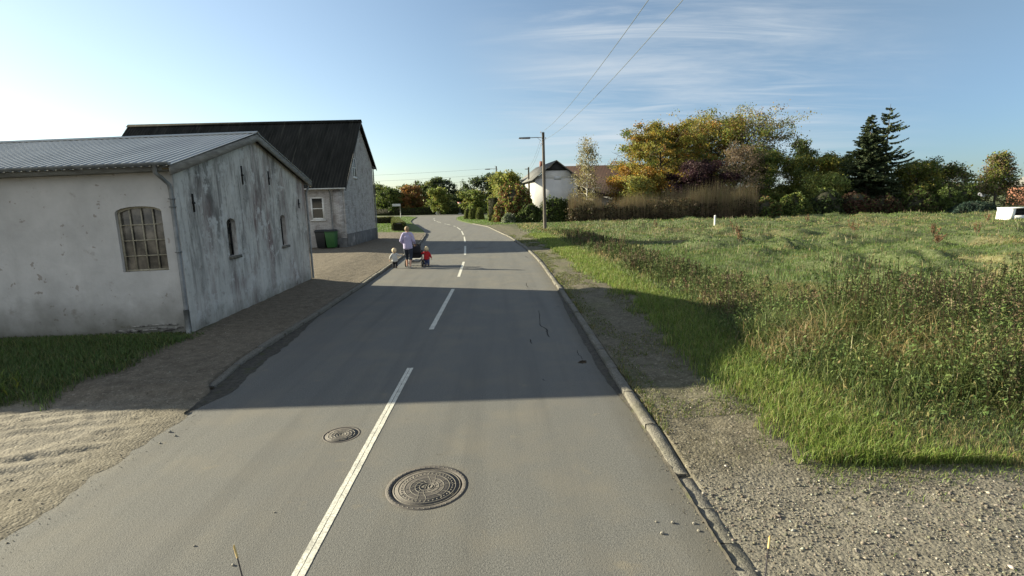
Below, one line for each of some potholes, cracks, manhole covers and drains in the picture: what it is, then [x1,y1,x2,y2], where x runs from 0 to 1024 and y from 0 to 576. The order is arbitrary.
manhole cover [385,466,468,511]
manhole cover [322,427,361,443]
